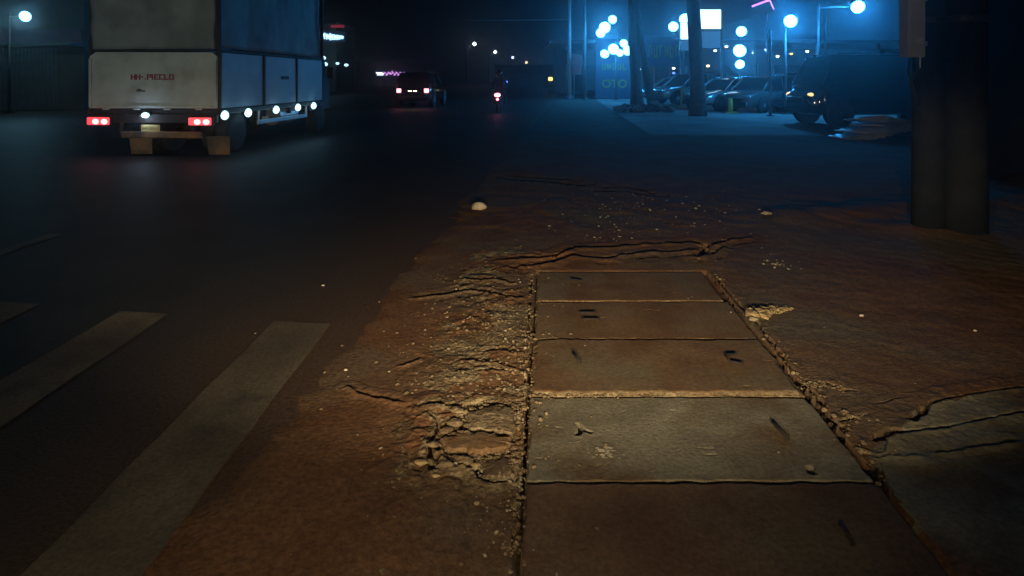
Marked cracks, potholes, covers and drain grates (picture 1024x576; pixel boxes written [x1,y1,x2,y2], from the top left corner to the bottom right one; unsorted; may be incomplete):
crack [495,174,672,197]
crack [332,234,1024,574]
